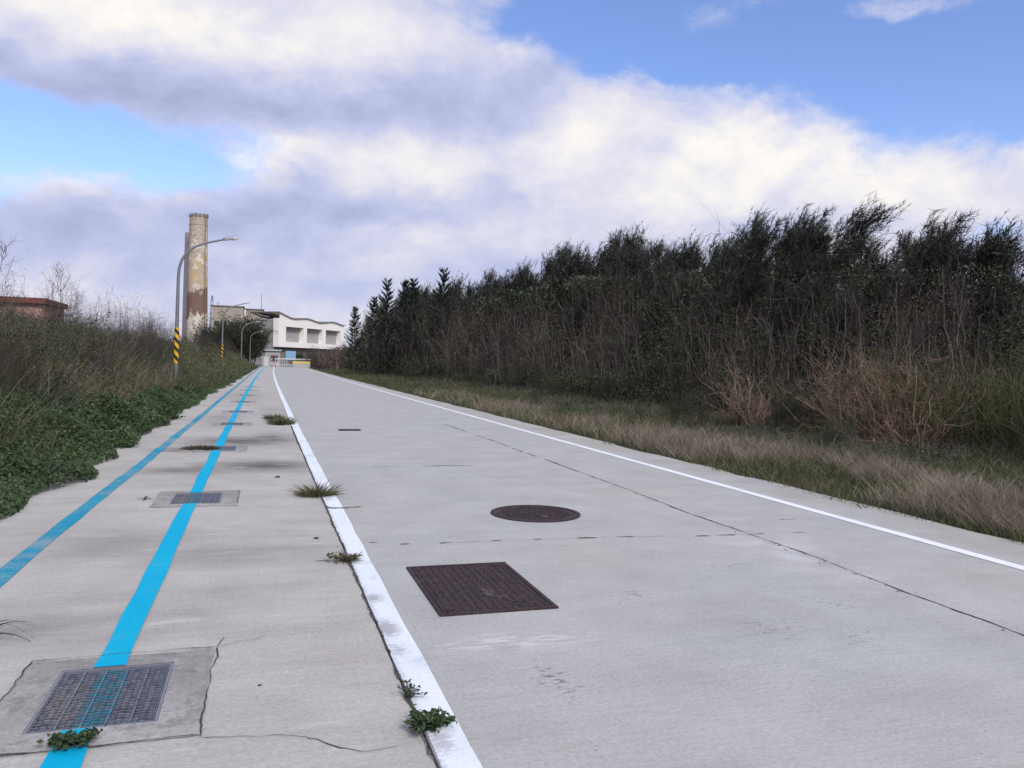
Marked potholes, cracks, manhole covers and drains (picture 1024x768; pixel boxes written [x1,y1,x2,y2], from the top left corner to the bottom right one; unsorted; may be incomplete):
manhole cover [491,505,581,523]
crack [229,734,399,751]
crack [0,636,263,755]
drain grate [0,649,215,756]
manhole cover [406,562,559,617]
drain grate [149,490,241,508]
